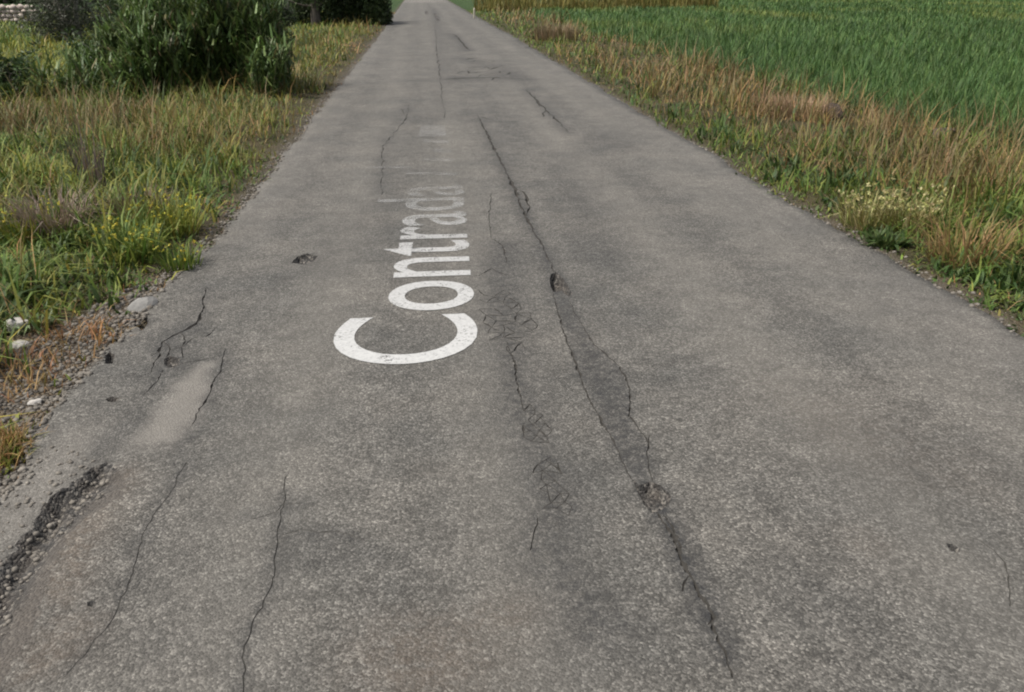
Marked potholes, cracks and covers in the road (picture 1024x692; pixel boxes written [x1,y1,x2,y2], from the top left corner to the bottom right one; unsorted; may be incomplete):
pothole [0,461,126,685]
crack [380,104,410,195]
crack [478,116,653,550]
crack [66,463,186,674]
pothole [631,478,671,513]
crack [140,290,226,425]
pothole [291,253,318,265]
crack [968,536,1011,606]
crack [242,477,361,692]
crack [435,27,568,132]
crack [657,512,733,678]
